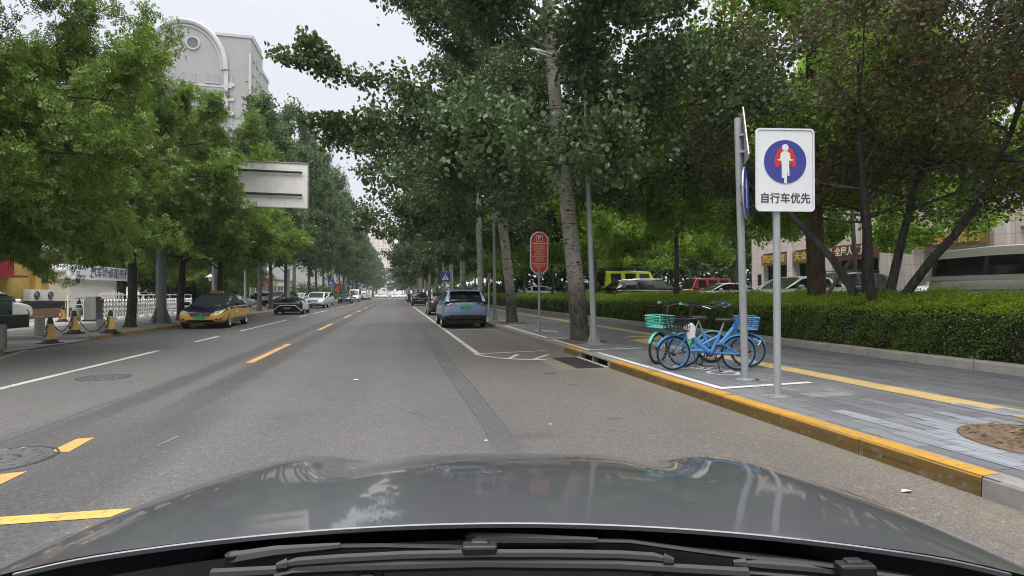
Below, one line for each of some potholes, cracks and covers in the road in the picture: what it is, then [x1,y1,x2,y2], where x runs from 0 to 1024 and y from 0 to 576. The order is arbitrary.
drain grate [553,351,616,368]
manhole cover [0,446,60,471]
